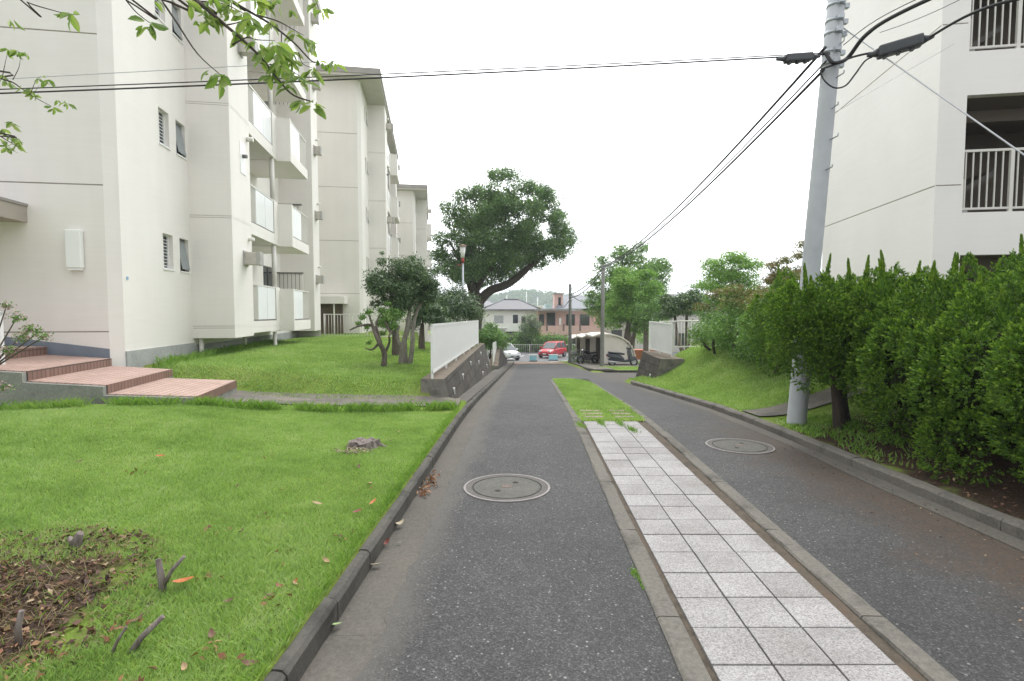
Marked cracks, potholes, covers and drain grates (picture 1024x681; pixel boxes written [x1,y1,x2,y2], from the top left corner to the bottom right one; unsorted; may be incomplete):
manhole cover [463,474,550,502]
manhole cover [705,438,775,454]
